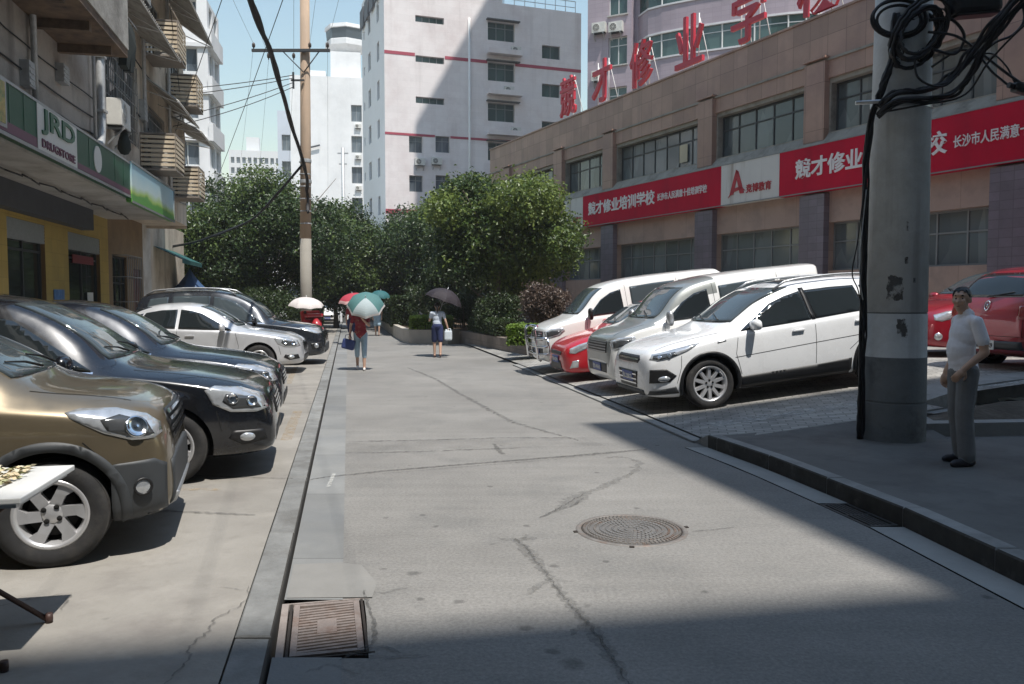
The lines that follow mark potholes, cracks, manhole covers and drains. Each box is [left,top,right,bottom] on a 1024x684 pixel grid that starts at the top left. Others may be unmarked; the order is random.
drain grate [284,598,375,669]
manhole cover [573,514,689,548]
drain grate [819,503,905,547]
crack [373,372,576,454]
